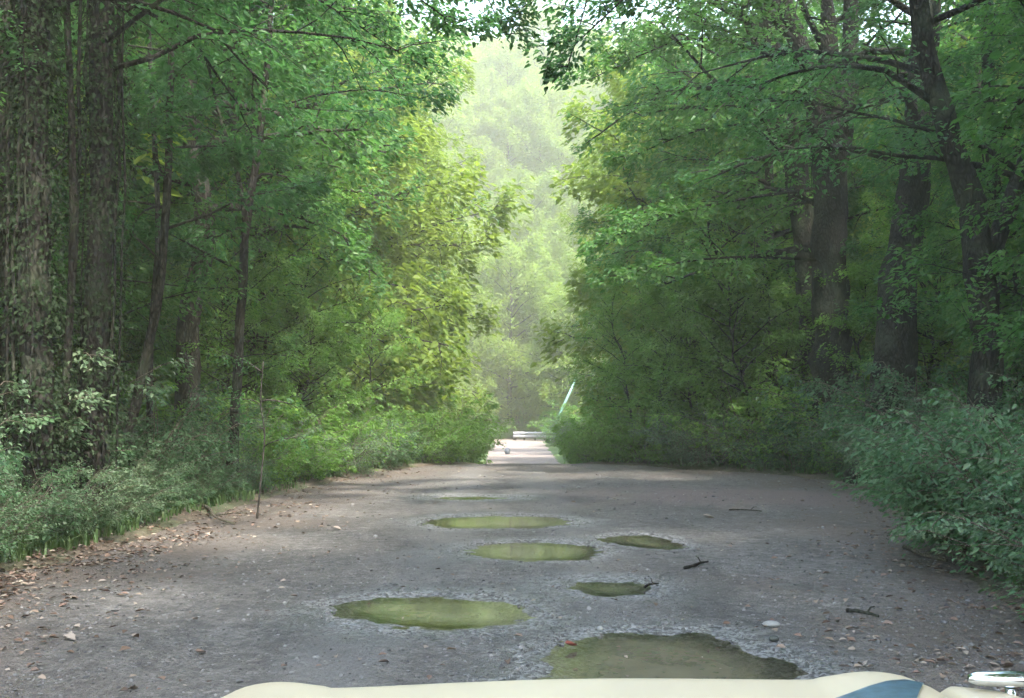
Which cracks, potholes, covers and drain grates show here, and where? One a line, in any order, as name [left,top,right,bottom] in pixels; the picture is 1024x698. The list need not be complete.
pothole [501,626,826,681]
pothole [555,577,662,597]
pothole [453,540,612,563]
pothole [415,514,582,529]
pothole [591,532,695,550]
pothole [319,593,555,632]
